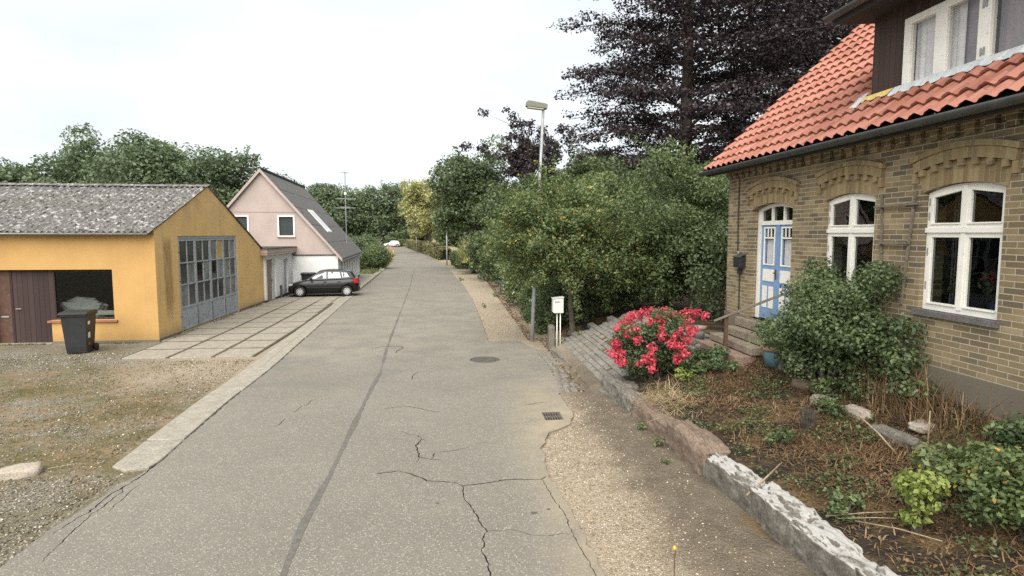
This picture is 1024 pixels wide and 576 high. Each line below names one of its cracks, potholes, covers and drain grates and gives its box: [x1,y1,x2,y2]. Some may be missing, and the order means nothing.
crack [43,464,157,561]
crack [376,431,596,576]
drain grate [542,412,564,420]
